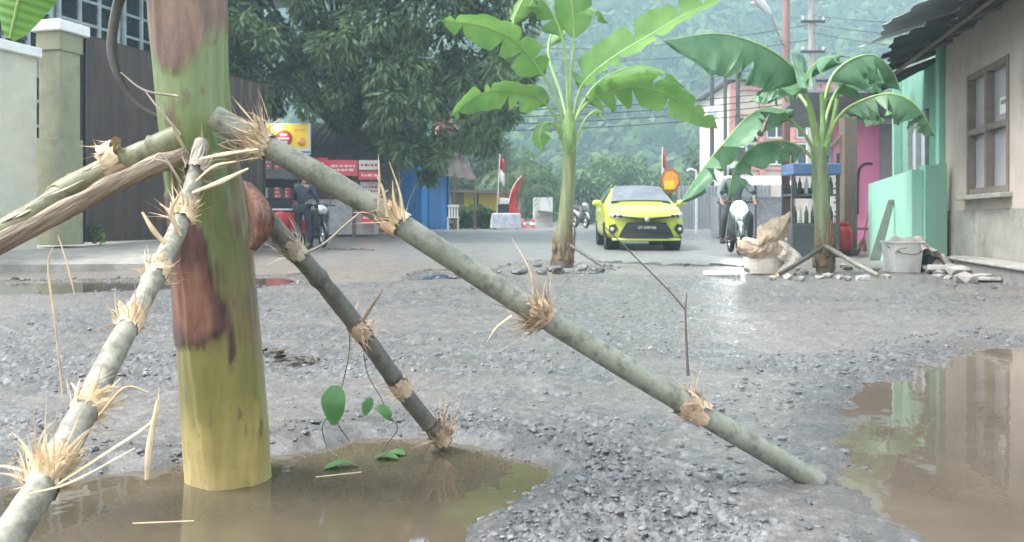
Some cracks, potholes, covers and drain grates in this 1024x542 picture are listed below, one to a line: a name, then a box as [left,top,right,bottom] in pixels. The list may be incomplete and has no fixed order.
pothole [490,259,621,276]
pothole [679,331,1024,542]
pothole [0,272,309,296]
pothole [0,407,638,542]
pothole [401,268,460,281]
